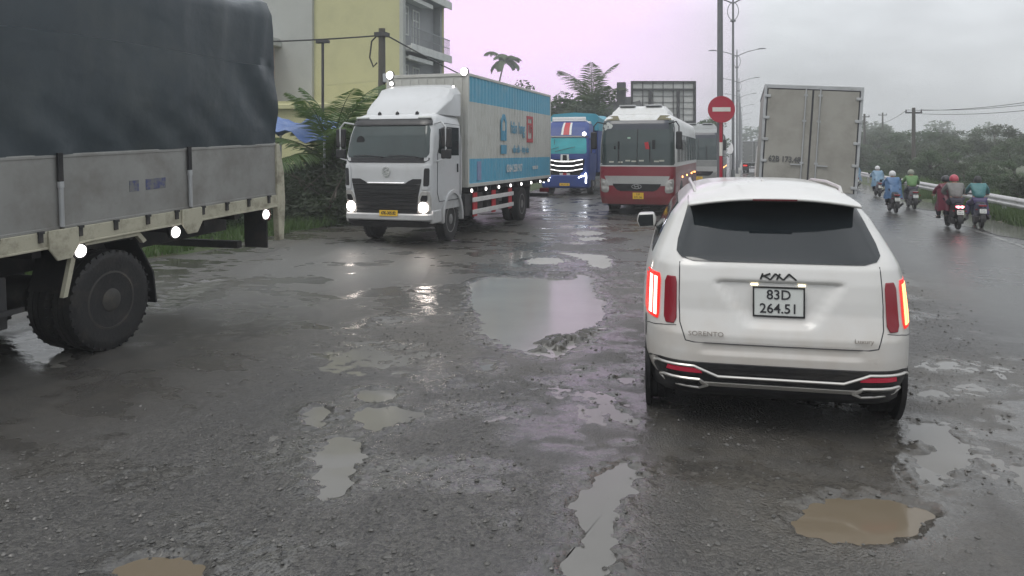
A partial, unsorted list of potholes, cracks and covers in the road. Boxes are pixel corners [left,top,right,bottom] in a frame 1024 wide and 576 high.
pothole [780,486,950,549]
pothole [303,432,372,501]
pothole [558,251,616,269]
pothole [351,403,434,434]
pothole [464,273,615,358]
pothole [550,460,655,576]
pothole [525,257,571,265]
pothole [102,547,219,576]
pothole [353,386,401,403]
pothole [892,415,983,490]
pothole [300,402,335,428]
